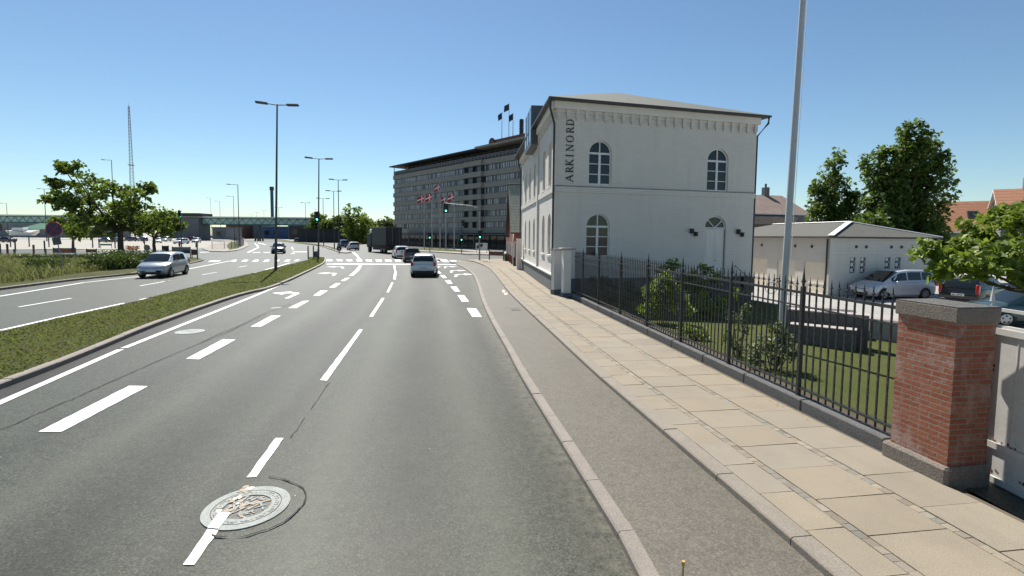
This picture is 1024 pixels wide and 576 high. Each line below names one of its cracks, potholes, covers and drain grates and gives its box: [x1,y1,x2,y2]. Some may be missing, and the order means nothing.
manhole cover [200,485,290,531]
